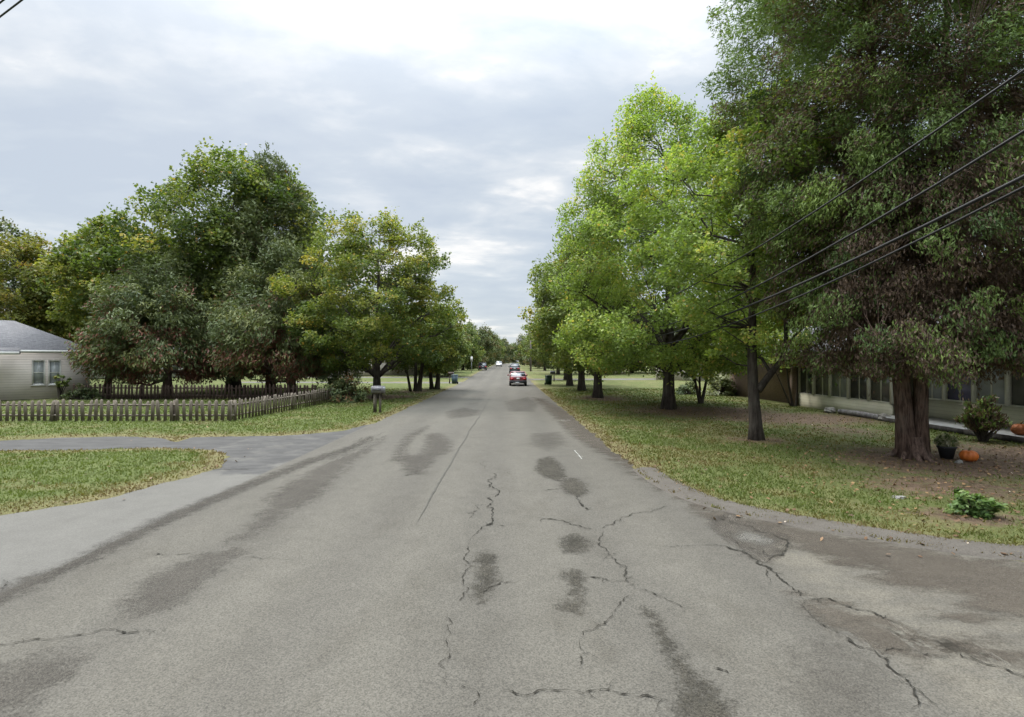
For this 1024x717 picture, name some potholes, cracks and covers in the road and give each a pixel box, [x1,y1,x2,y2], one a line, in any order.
crack [668,532,802,596]
crack [543,488,685,669]
crack [2,627,173,645]
crack [438,462,513,704]
crack [500,679,670,710]
